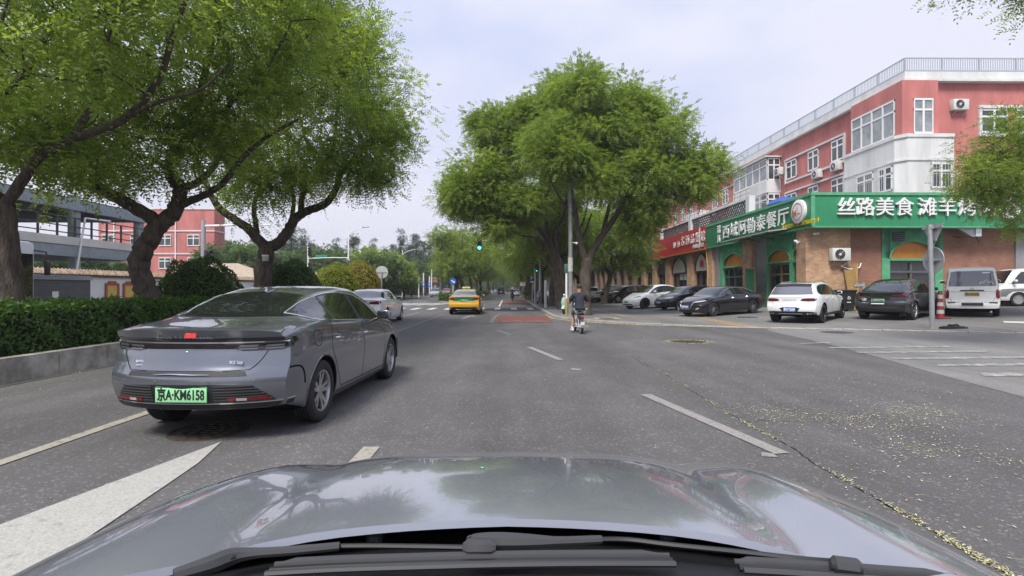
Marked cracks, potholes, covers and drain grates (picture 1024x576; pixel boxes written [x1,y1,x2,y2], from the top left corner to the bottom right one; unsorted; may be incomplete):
crack [608,344,1011,576]
manhole cover [165,421,251,442]
